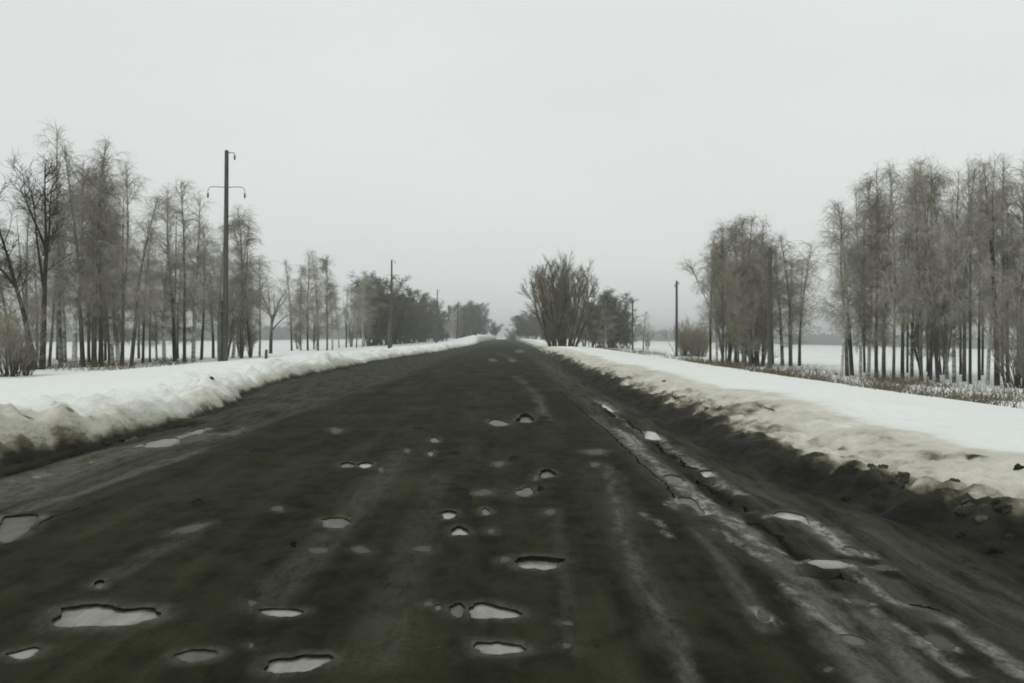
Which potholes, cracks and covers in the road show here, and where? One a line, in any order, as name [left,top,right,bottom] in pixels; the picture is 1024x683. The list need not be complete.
pothole [174,649,218,663]
pothole [449,603,465,617]
pothole [539,469,557,478]
pothole [516,413,535,423]
pothole [450,525,470,535]
pothole [52,603,161,627]
pothole [515,486,534,497]
pothole [5,647,40,659]
pothole [514,556,565,570]
pothole [473,641,527,654]
pothole [468,602,523,619]
pothole [264,654,334,673]
